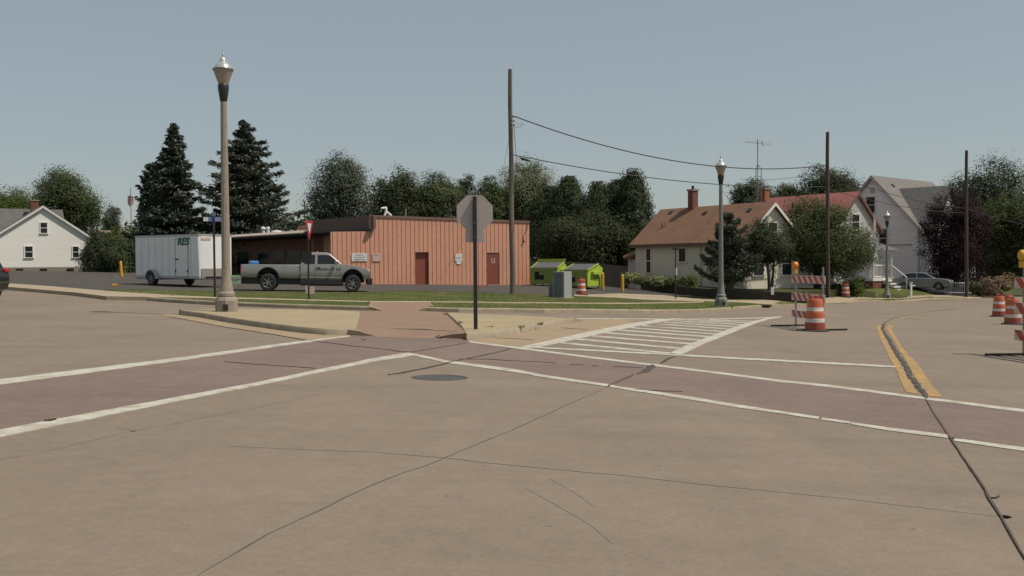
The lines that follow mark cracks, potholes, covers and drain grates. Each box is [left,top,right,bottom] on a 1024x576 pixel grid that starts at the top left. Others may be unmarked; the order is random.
crack [197,388,997,576]
crack [489,359,640,368]
